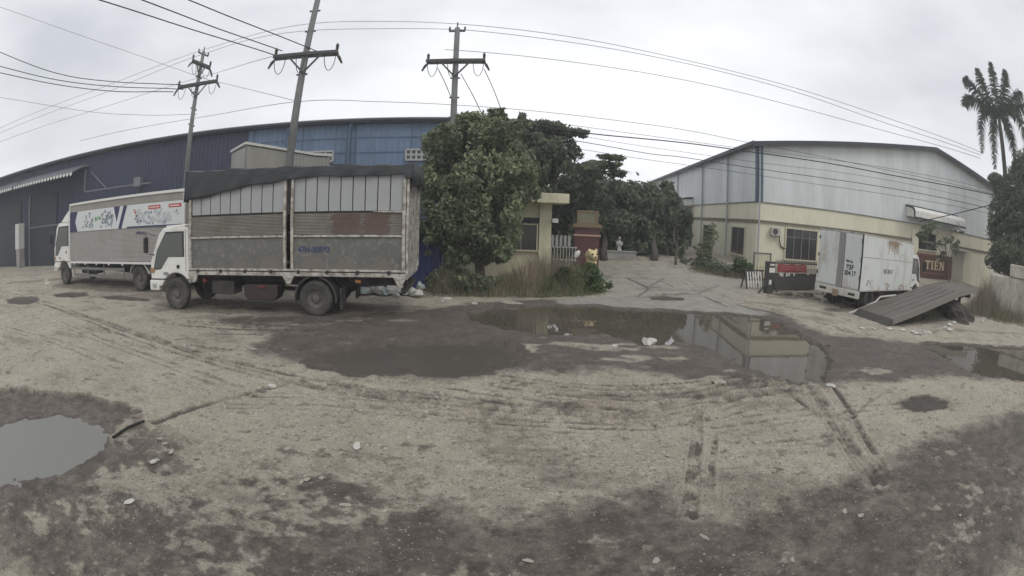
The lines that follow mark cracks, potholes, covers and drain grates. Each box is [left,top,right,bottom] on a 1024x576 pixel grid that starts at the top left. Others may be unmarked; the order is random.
pothole [7,296,39,304]
pothole [0,386,141,505]
pothole [918,341,1024,378]
pothole [901,394,950,412]
crack [610,277,730,308]
pothole [465,303,834,384]
